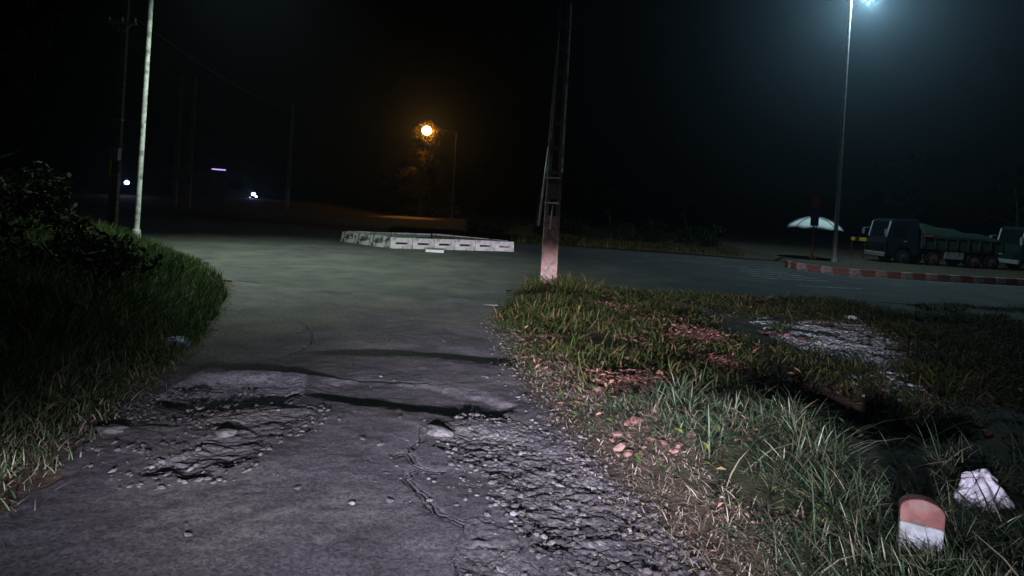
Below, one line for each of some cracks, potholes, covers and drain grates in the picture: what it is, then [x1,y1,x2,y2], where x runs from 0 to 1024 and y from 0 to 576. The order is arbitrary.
crack [391,426,465,527]
pothole [139,408,322,478]
pothole [426,418,692,576]
crack [272,321,316,359]
